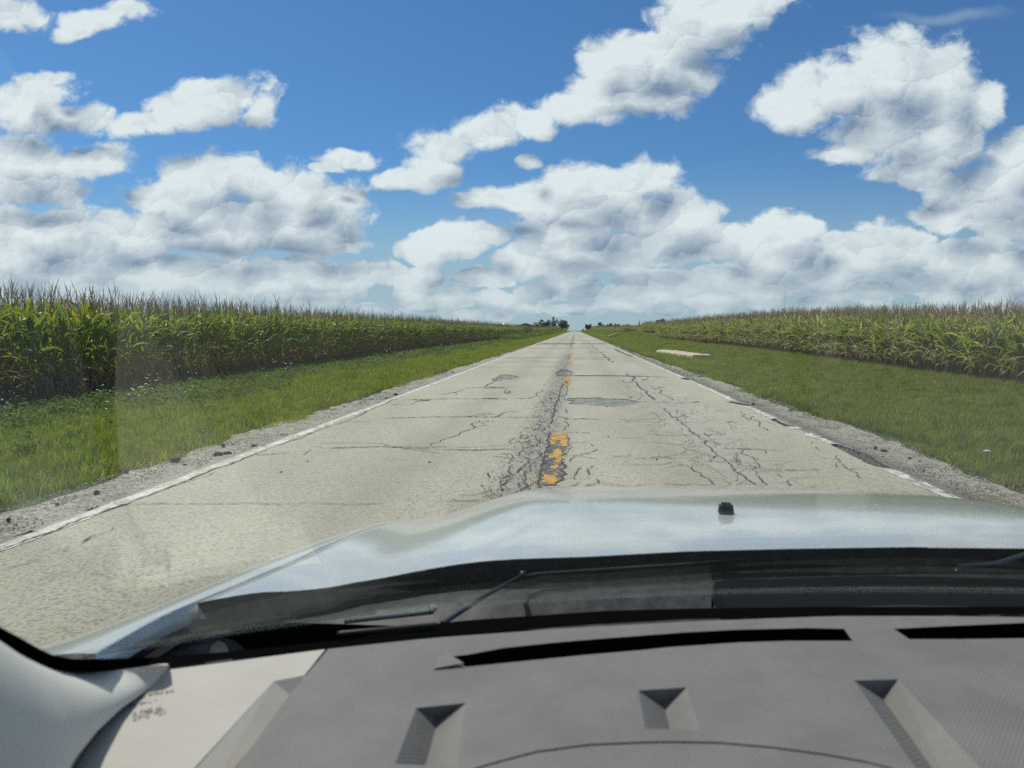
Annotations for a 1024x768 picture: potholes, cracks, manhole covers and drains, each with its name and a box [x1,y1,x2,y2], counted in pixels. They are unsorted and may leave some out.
crack [2,342,861,569]
